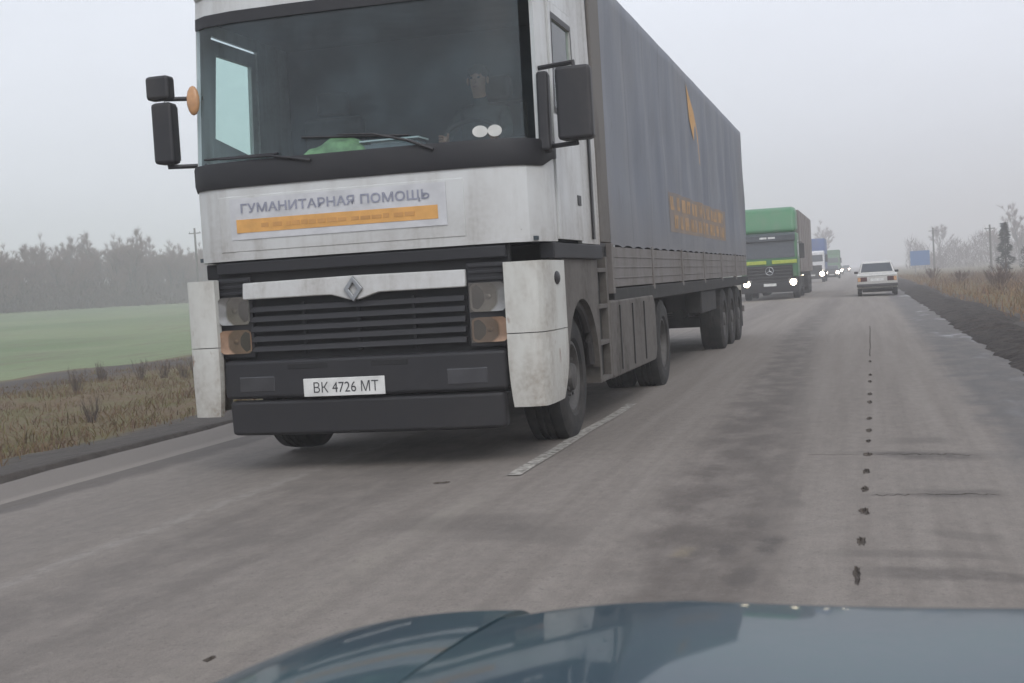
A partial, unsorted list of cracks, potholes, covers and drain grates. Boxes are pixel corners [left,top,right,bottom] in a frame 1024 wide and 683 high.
pothole [852,565,861,586]
